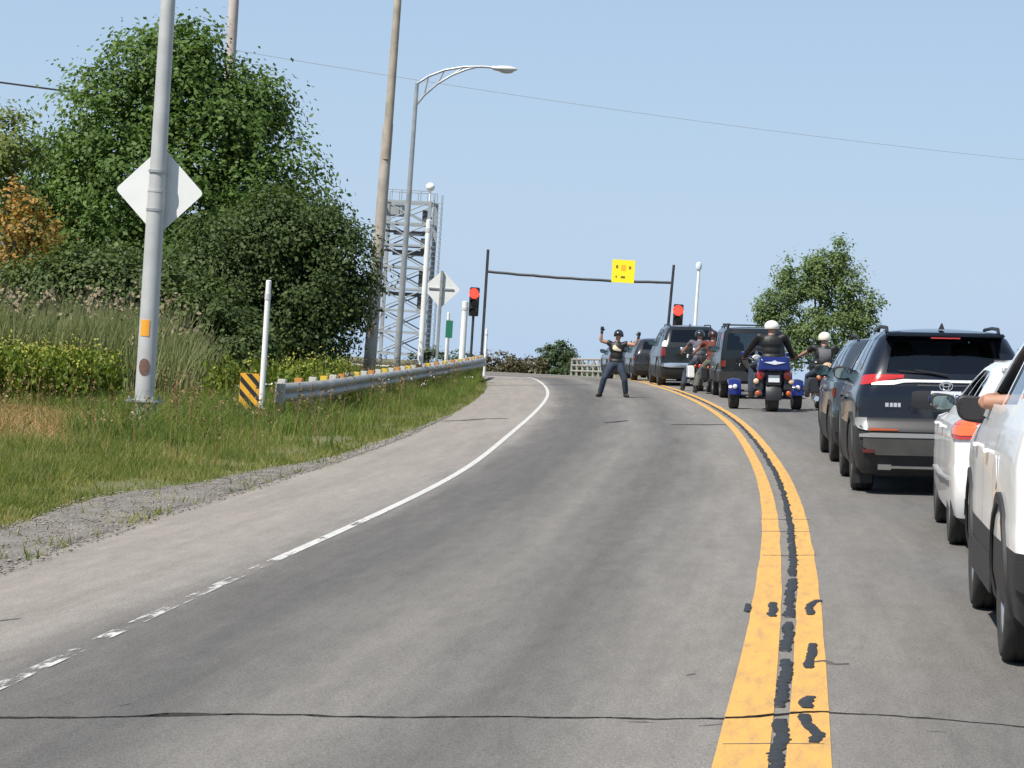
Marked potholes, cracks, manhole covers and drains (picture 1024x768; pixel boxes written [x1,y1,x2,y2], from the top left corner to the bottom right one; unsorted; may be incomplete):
crack [0,703,1024,733]
